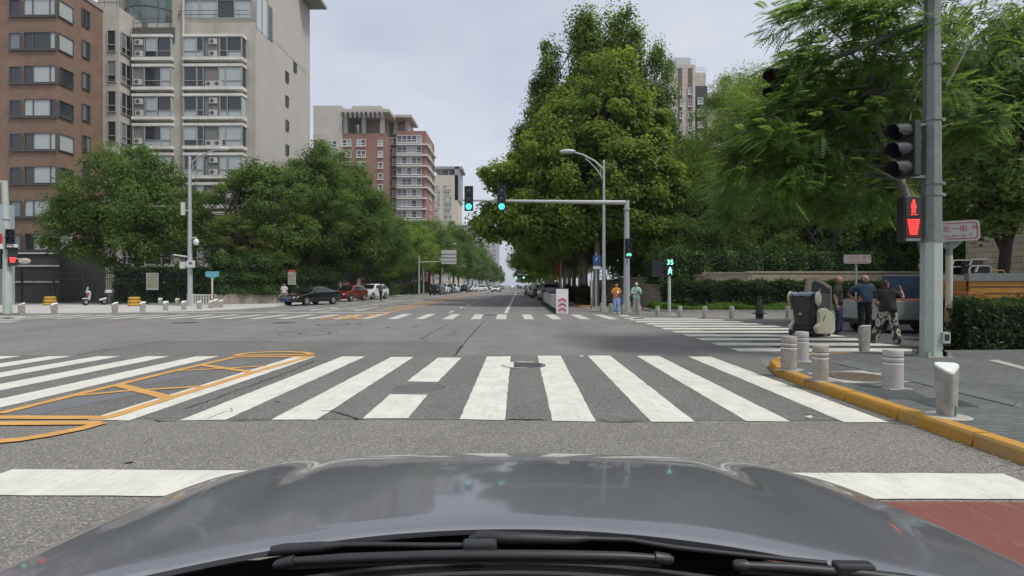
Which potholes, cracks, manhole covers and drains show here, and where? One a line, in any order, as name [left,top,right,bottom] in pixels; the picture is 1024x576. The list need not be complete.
manhole cover [389,382,450,394]
manhole cover [829,372,882,382]
